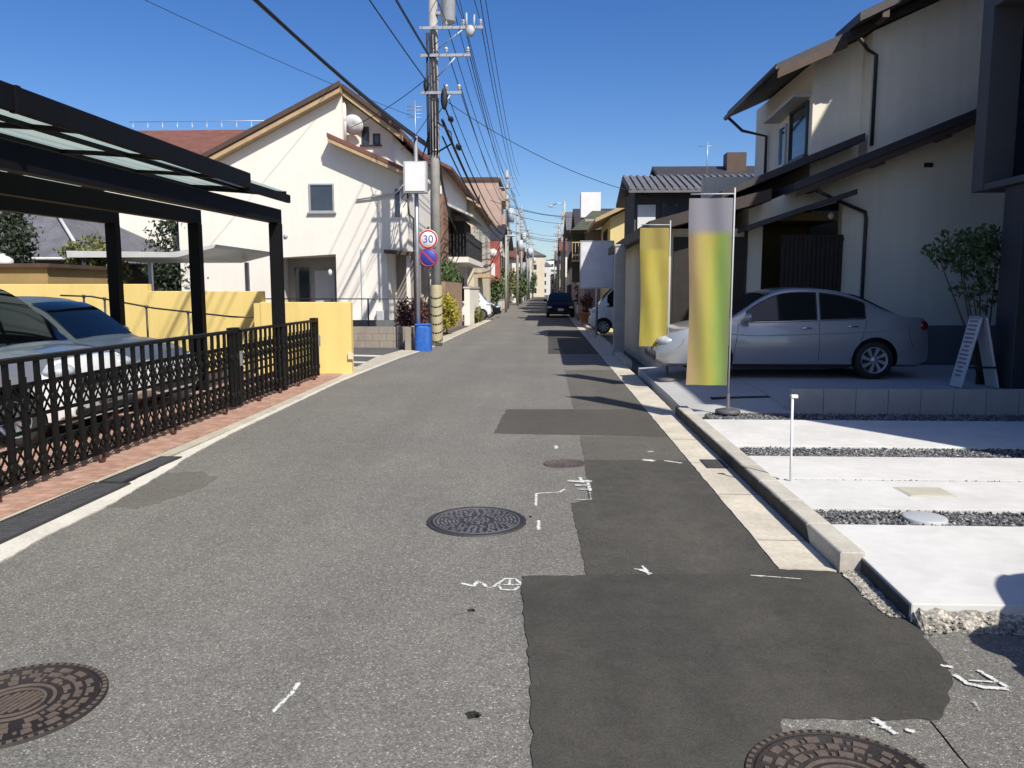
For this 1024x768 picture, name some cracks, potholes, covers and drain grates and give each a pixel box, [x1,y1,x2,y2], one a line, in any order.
crack [931,722,969,768]
manhole cover [427,507,526,537]
manhole cover [0,662,109,749]
manhole cover [544,458,586,469]
manhole cover [744,729,930,768]
drain grate [0,482,131,544]
drain grate [699,459,729,469]
